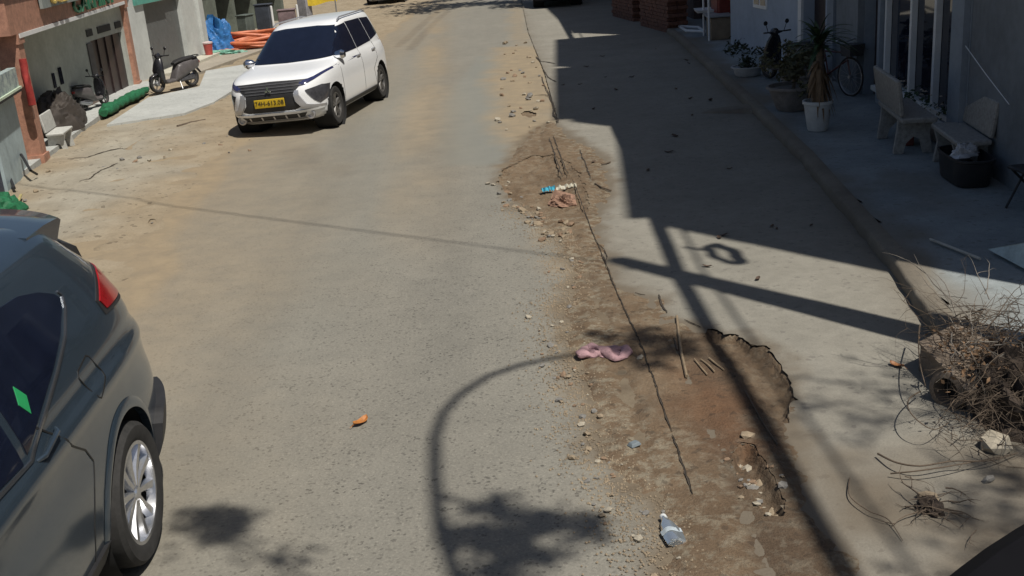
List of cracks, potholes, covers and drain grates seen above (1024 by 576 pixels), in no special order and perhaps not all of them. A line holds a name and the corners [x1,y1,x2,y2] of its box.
crack [536,57,591,178]
pothole [731,442,786,516]
pothole [703,329,795,423]
crack [72,148,127,181]
